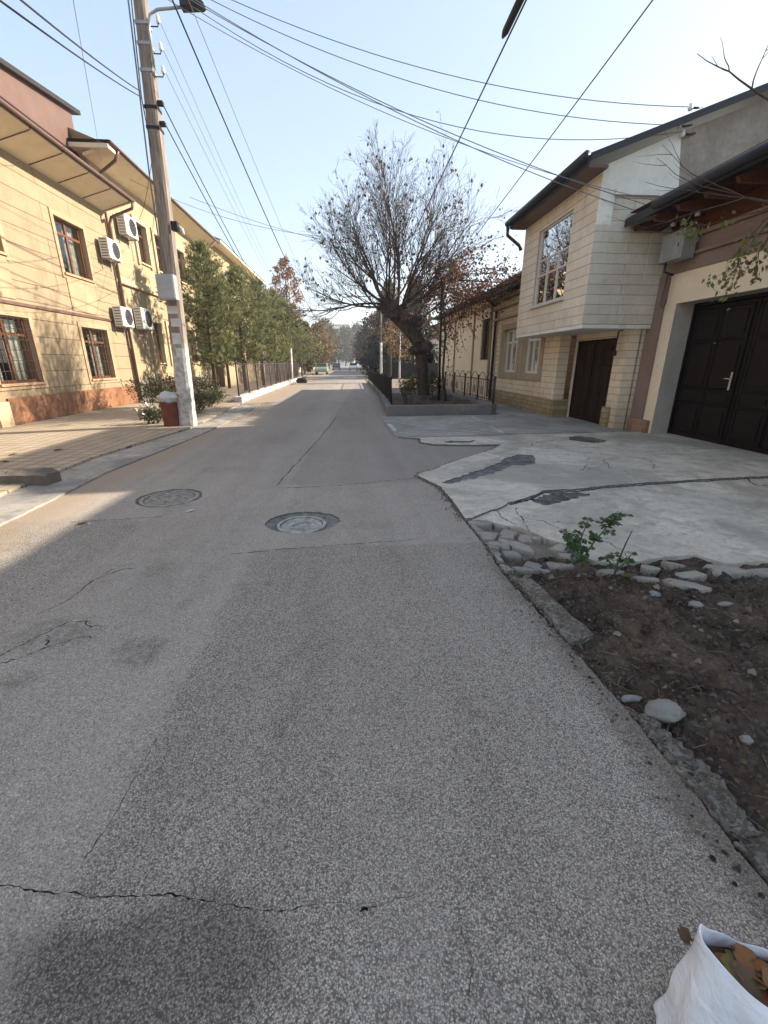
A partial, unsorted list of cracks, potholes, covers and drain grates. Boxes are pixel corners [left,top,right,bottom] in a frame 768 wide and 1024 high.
manhole cover [135,489,202,507]
crack [0,884,423,912]
manhole cover [265,512,340,533]
crack [0,563,133,663]
crack [82,739,157,863]
